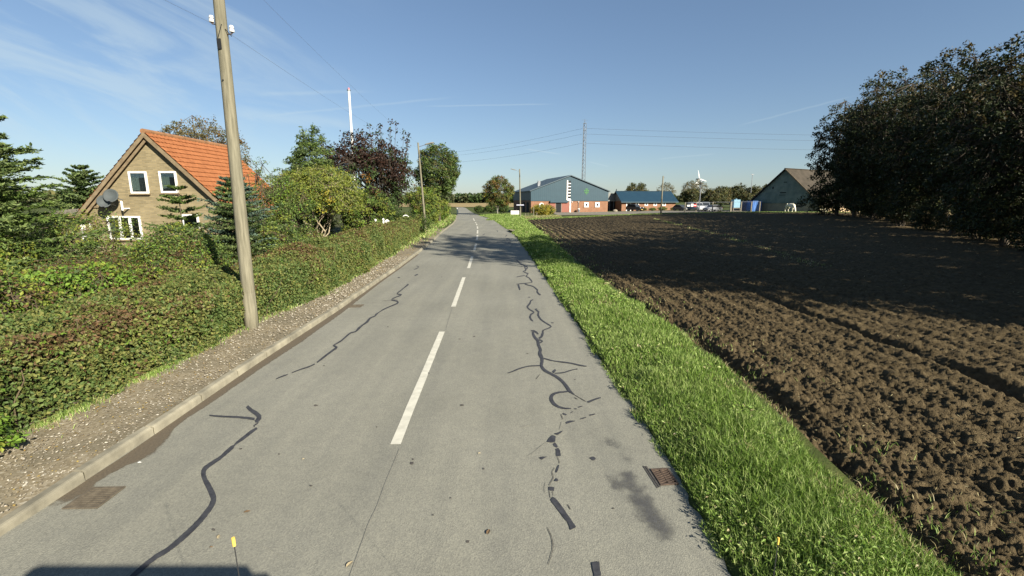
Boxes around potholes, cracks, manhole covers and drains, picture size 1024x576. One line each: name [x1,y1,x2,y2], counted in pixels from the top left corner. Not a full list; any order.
crack [528,395,585,509]
drain grate [643,466,679,488]
drain grate [62,486,126,509]
